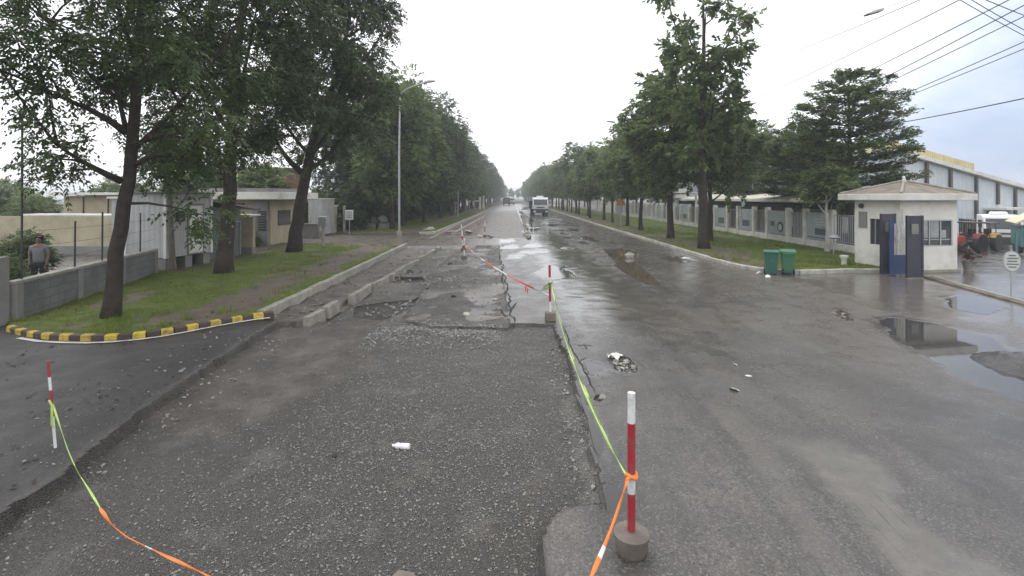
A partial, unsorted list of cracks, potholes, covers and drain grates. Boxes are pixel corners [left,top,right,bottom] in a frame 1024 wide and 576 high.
pothole [347,292,422,322]
pothole [605,353,646,376]
crack [499,253,517,332]
crack [563,326,596,394]
